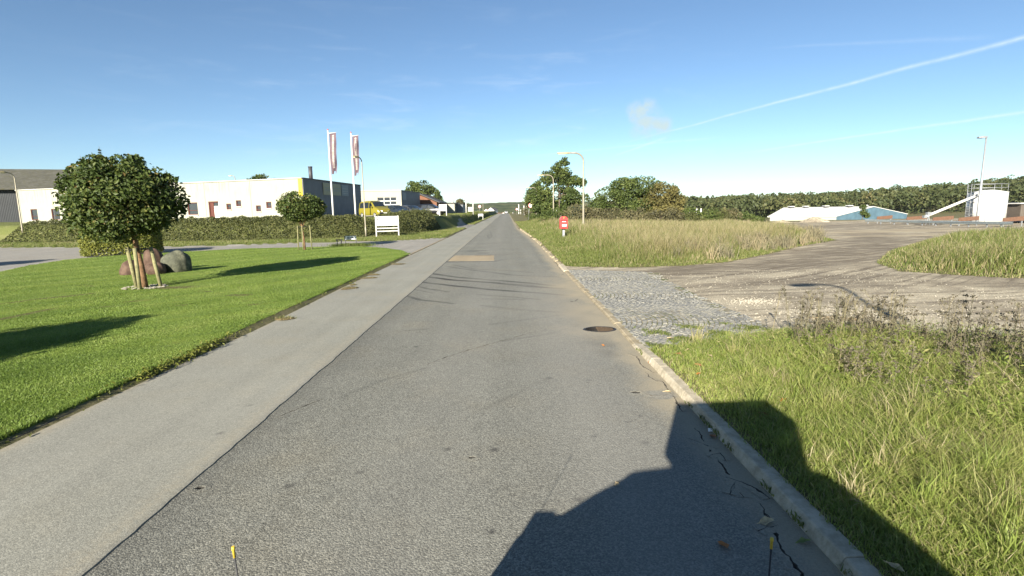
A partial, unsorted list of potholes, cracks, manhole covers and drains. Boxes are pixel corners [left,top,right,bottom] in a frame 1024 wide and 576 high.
crack [625,353,814,576]
